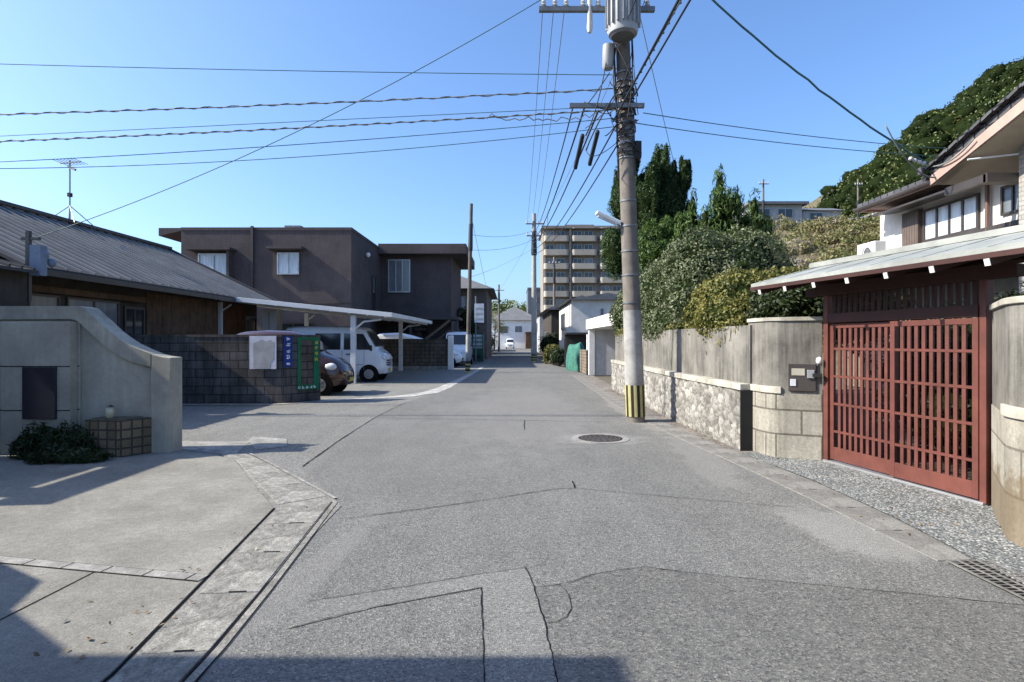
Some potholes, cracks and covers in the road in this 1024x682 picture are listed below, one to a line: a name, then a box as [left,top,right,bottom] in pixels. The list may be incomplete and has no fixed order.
drain grate [945,560,1024,600]
manhole cover [572,433,630,444]
crack [306,564,1022,682]
crack [351,481,791,518]
